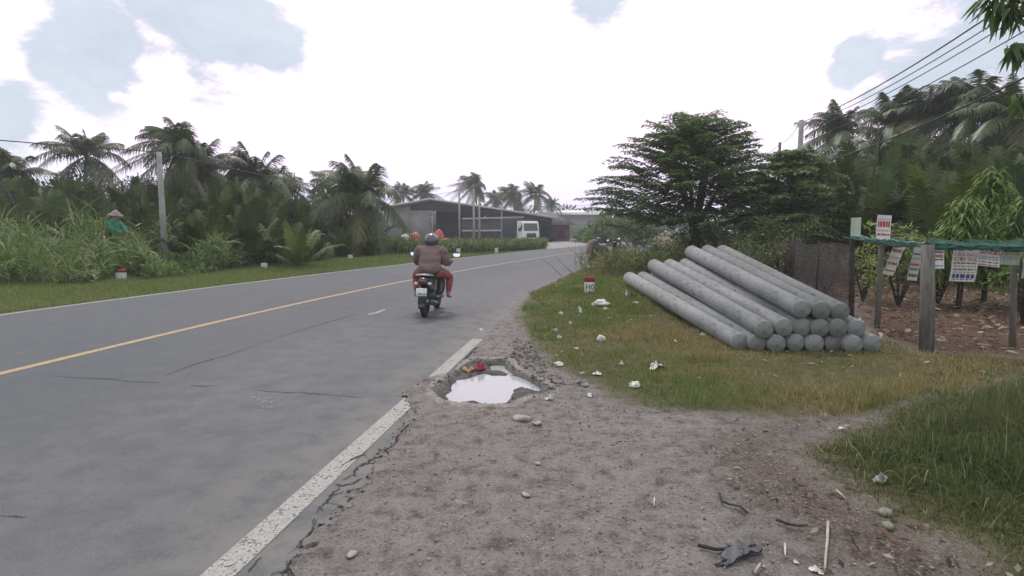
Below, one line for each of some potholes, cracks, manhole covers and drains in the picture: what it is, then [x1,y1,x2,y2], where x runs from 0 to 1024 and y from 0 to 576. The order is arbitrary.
pothole [424,356,559,408]
crack [248,421,417,576]
